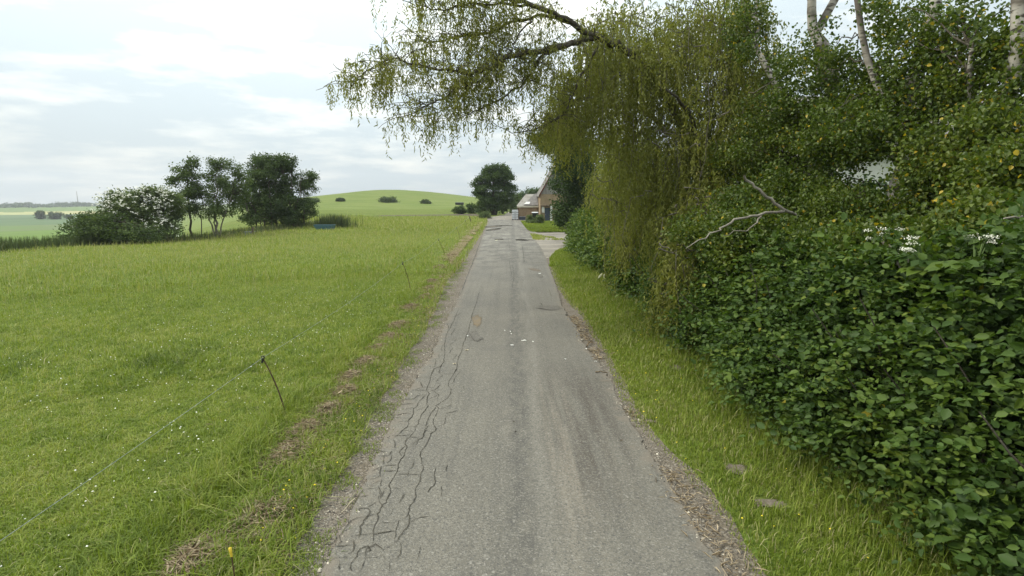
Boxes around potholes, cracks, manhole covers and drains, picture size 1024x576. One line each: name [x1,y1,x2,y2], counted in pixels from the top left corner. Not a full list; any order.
crack [334,238,482,571]
